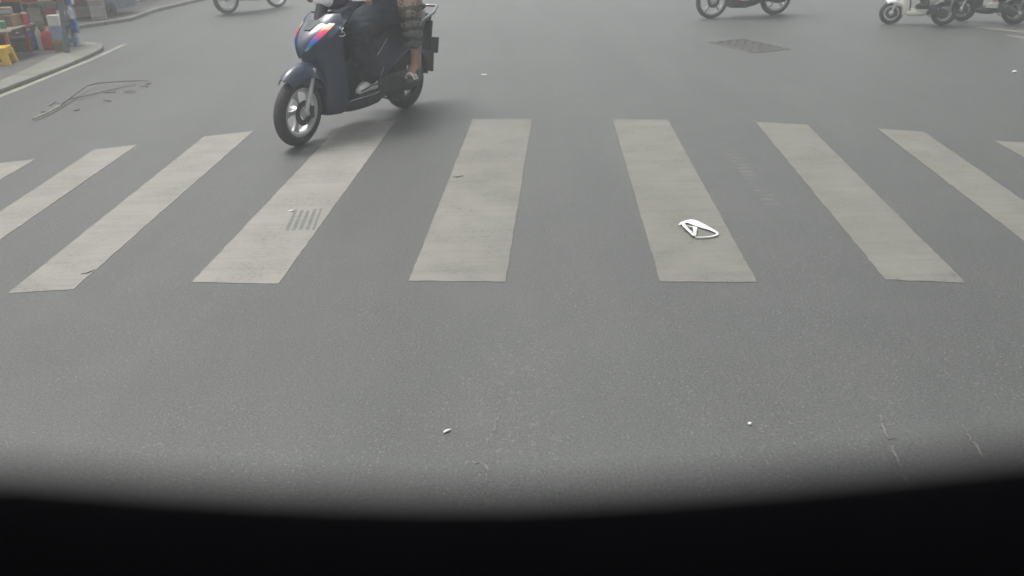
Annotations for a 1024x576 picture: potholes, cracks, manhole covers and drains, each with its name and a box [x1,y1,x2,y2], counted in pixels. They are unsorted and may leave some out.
crack [489,394,501,442]
manhole cover [708,38,791,53]
crack [879,415,899,462]
crack [962,424,982,453]
